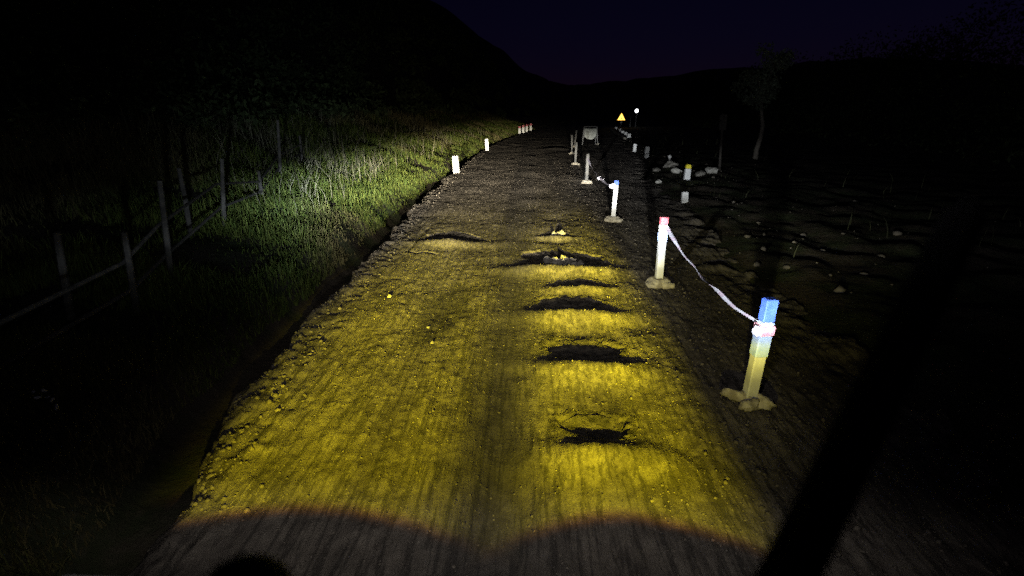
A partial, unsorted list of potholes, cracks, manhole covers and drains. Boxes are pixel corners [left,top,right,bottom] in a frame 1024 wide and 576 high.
pothole [555,276,600,286]
pothole [516,244,608,266]
pothole [547,408,641,441]
pothole [532,294,609,309]
pothole [421,231,484,241]
pothole [538,335,631,361]
